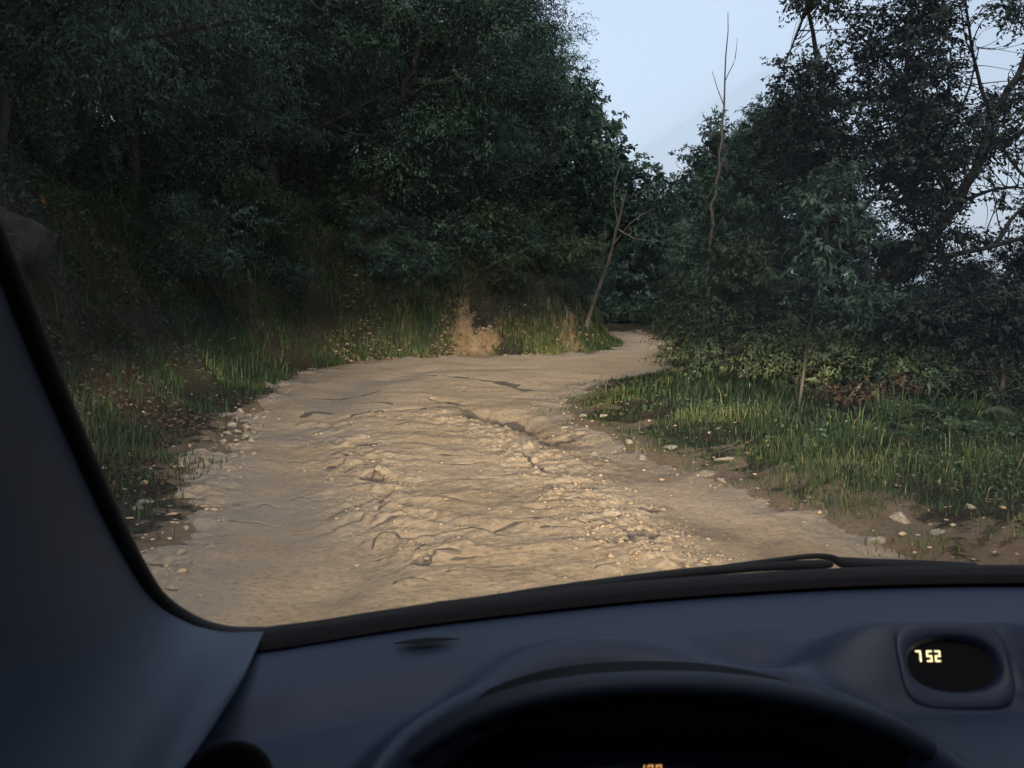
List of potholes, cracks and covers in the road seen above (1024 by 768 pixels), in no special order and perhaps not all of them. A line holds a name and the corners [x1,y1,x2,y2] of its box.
pothole [359,471,388,483]
crack [299,374,561,479]
crack [260,440,632,584]
